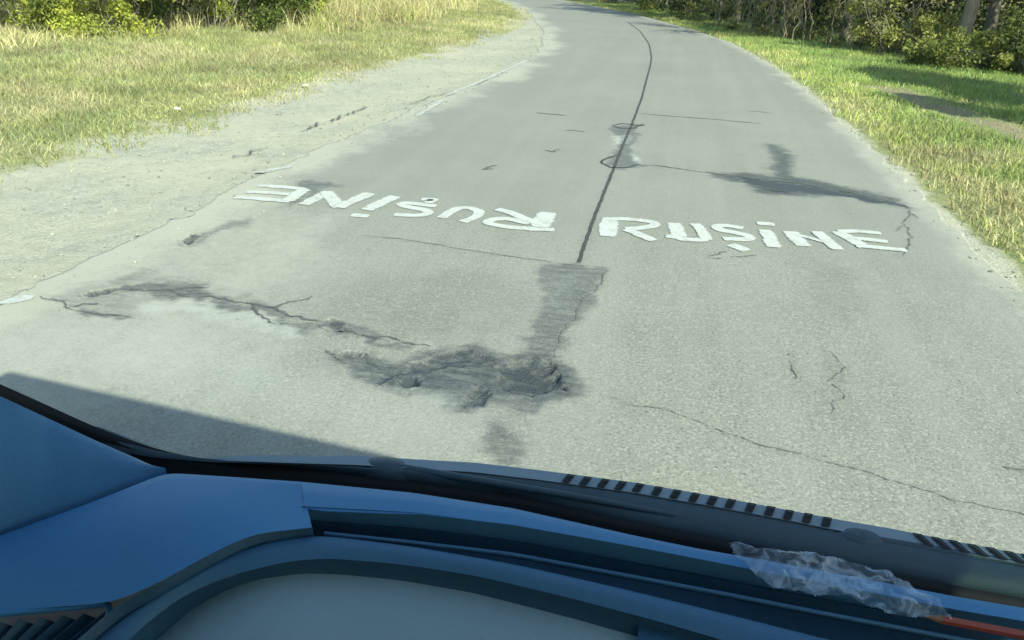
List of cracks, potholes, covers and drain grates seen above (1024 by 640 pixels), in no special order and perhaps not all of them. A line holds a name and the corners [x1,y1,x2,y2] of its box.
crack [828,352,846,414]
crack [612,397,1024,514]
crack [122,287,430,371]
crack [897,204,917,258]
crack [40,296,130,317]
